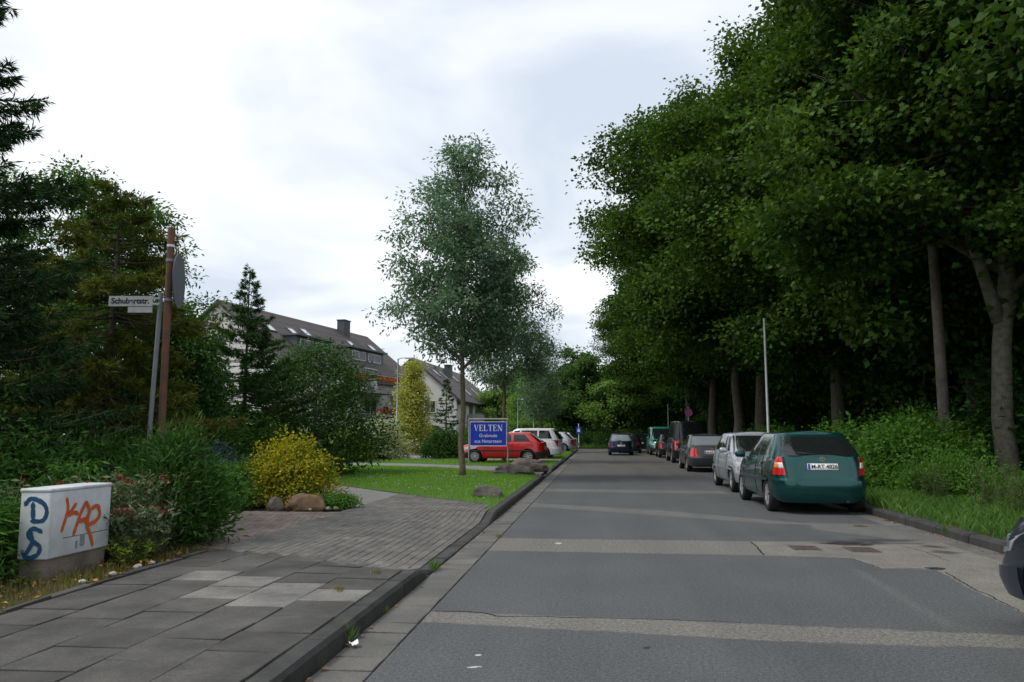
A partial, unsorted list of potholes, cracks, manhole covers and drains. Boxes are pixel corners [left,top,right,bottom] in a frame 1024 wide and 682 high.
crack [444,611,741,623]
